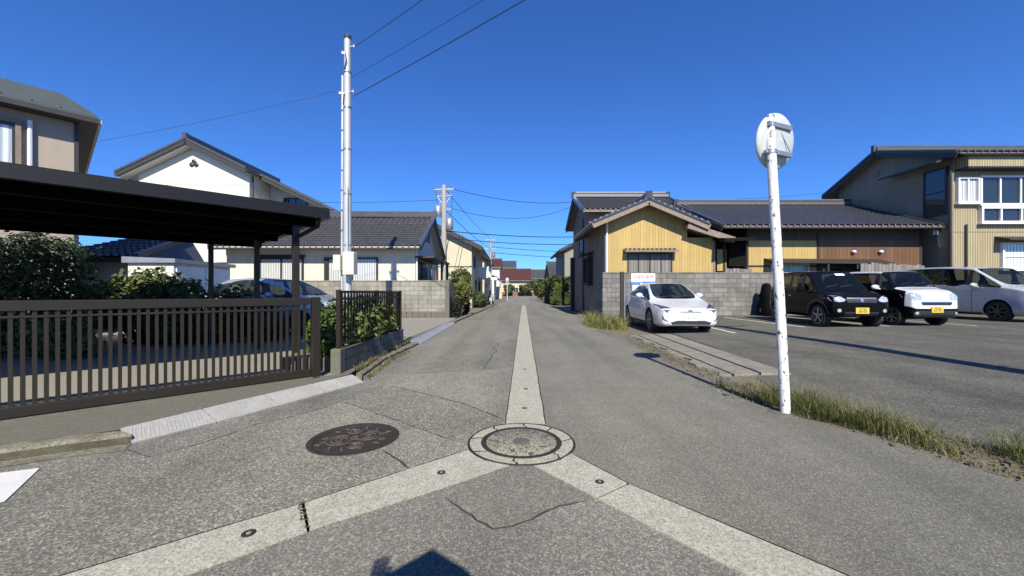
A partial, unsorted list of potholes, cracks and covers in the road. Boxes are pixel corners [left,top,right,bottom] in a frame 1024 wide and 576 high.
crack [382,449,409,469]
manhole cover [306,423,399,456]
crack [445,497,594,530]
manhole cover [468,423,575,466]
